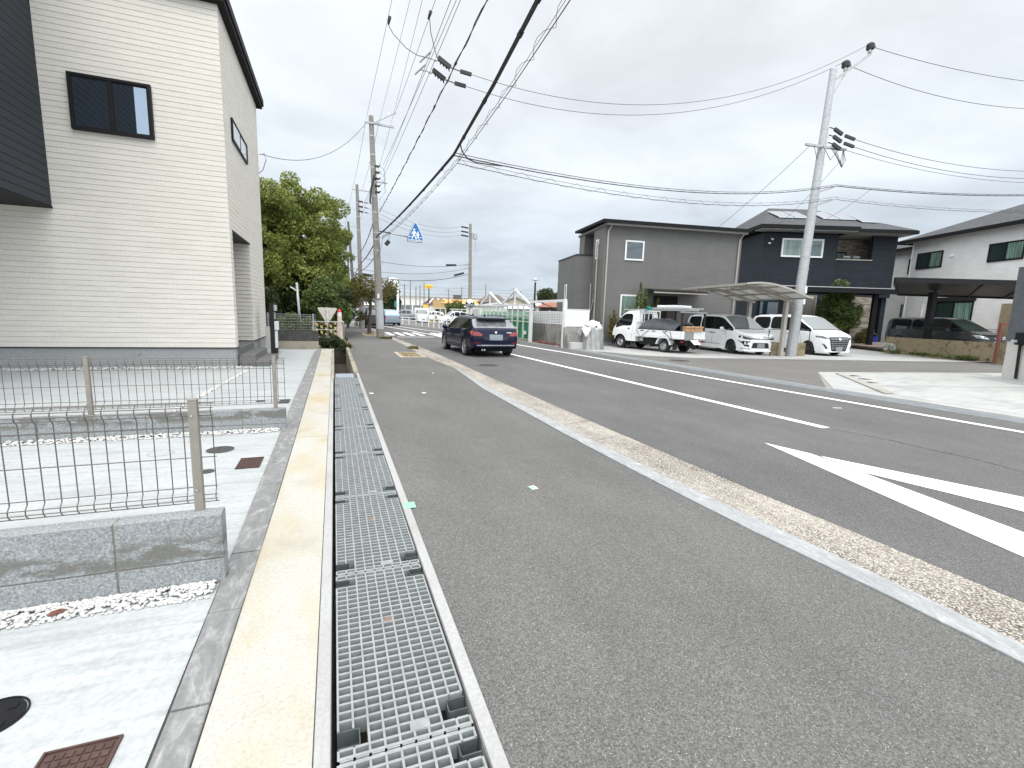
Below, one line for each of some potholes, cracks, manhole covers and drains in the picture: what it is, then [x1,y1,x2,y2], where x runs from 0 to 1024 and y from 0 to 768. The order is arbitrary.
drain grate [335,385,363,396]
drain grate [335,426,382,455]
drain grate [335,452,396,498]
manhole cover [0,696,31,732]
drain grate [335,377,360,386]
drain grate [335,408,374,428]
drain grate [335,395,368,410]
drain grate [335,492,420,577]
drain grate [337,726,488,768]
